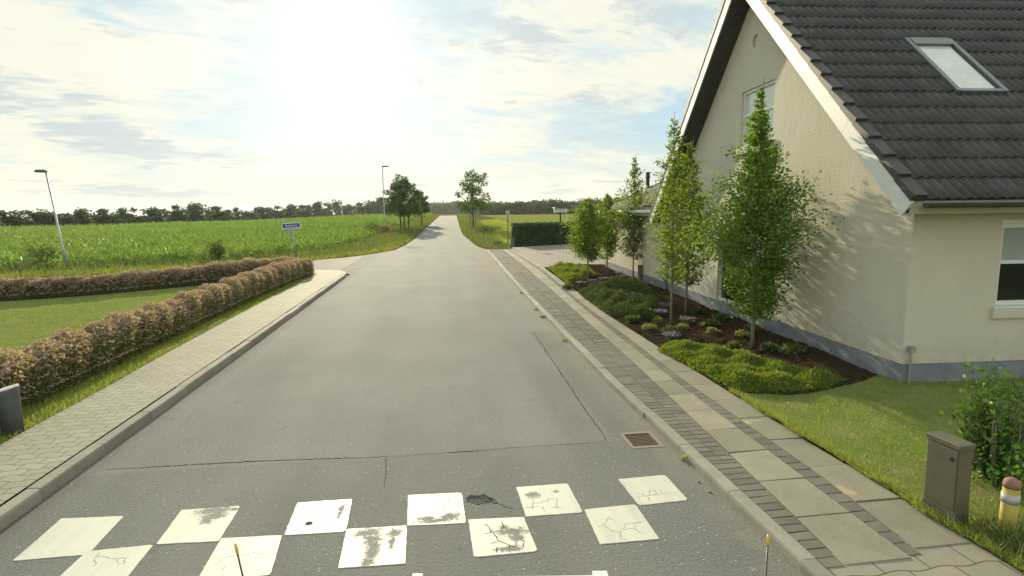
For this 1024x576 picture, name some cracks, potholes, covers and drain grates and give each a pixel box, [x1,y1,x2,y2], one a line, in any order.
crack [106,442,600,488]
pothole [466,494,513,509]
crack [484,522,525,553]
drain grate [620,431,665,449]
